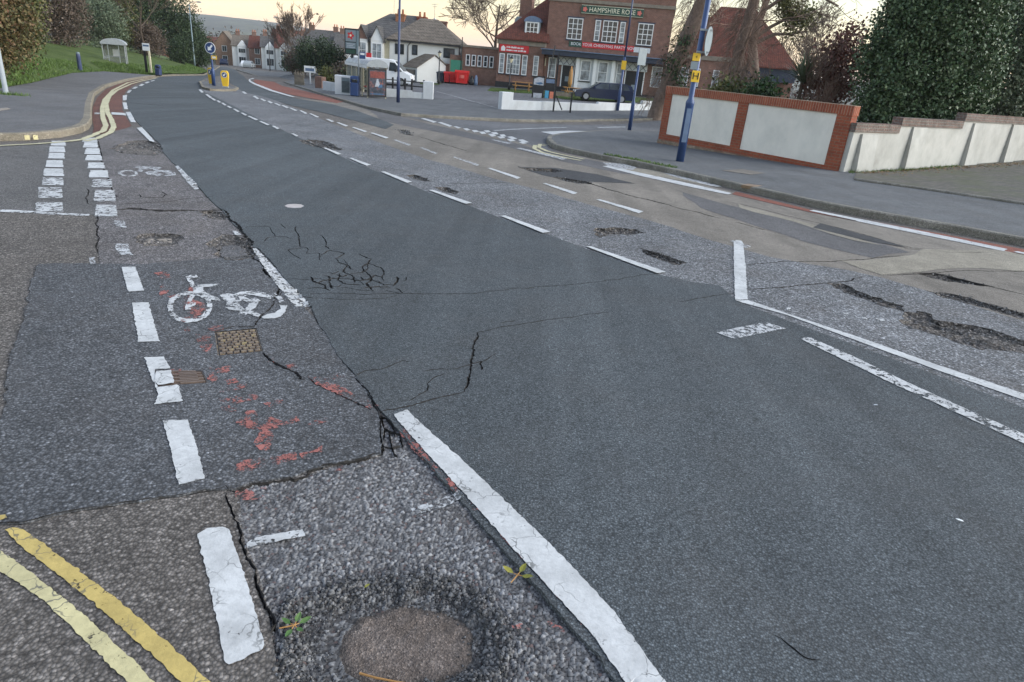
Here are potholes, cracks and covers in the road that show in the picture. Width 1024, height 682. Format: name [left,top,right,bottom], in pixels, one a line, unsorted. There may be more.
pothole [553,176,595,185]
pothole [827,282,906,312]
pothole [110,140,164,156]
pothole [134,232,184,246]
manhole cover [215,329,263,356]
pothole [299,138,343,150]
crack [97,140,658,493]
pothole [593,226,646,238]
pothole [925,290,1024,320]
pothole [641,248,686,265]
crack [775,635,819,660]
